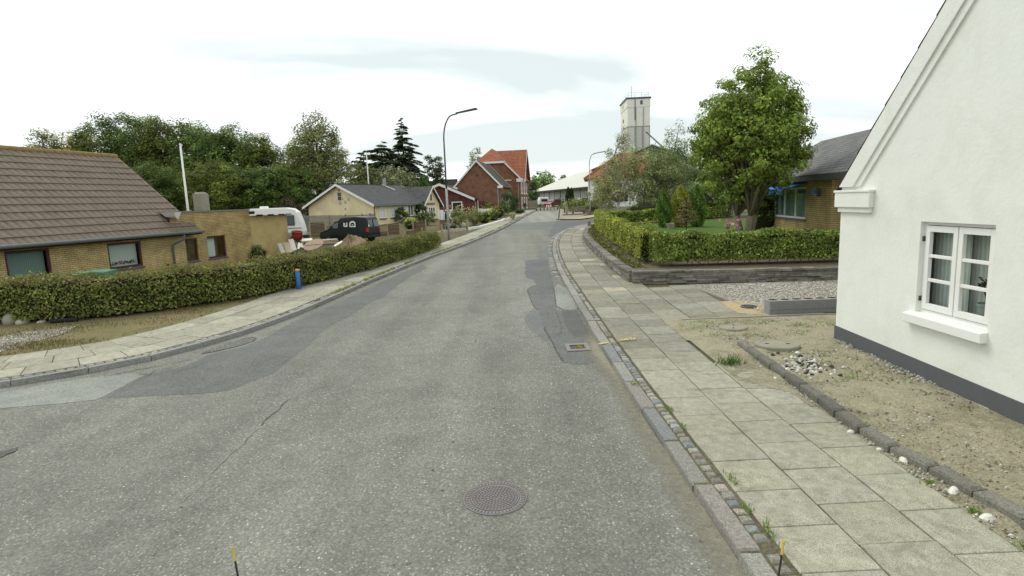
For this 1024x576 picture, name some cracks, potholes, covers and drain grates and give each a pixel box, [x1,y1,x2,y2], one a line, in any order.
manhole cover [463,481,527,516]
drain grate [564,343,591,352]
manhole cover [719,324,748,332]
manhole cover [755,339,800,352]
